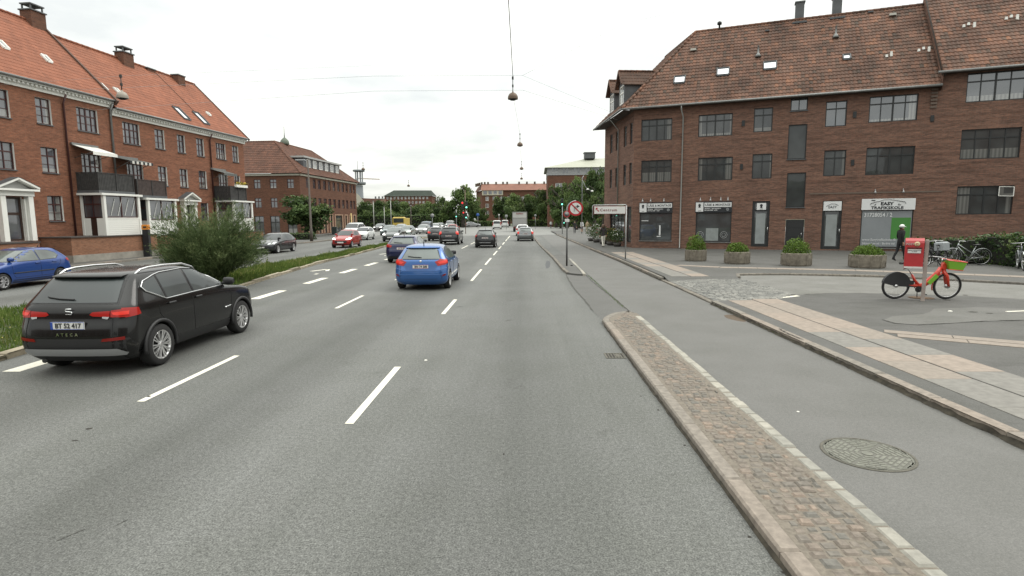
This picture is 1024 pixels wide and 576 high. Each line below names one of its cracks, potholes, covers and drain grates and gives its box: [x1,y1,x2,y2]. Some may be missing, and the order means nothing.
manhole cover [820,437,919,472]
